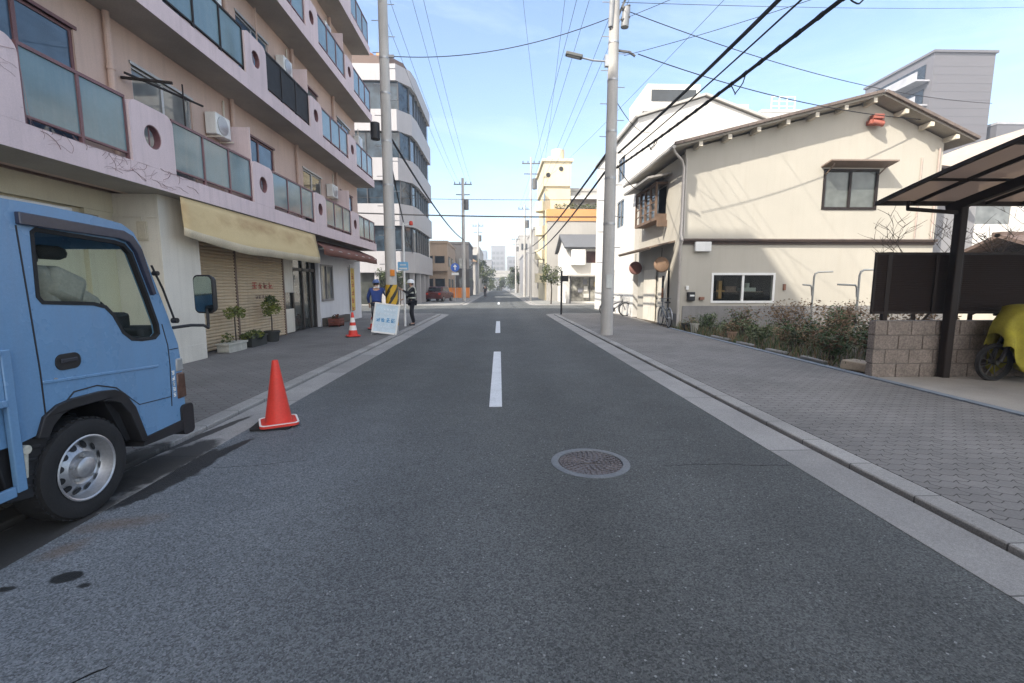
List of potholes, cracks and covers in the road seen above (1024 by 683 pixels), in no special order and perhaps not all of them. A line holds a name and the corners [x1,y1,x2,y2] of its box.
crack [72,665,111,683]
manhole cover [551,448,630,479]
